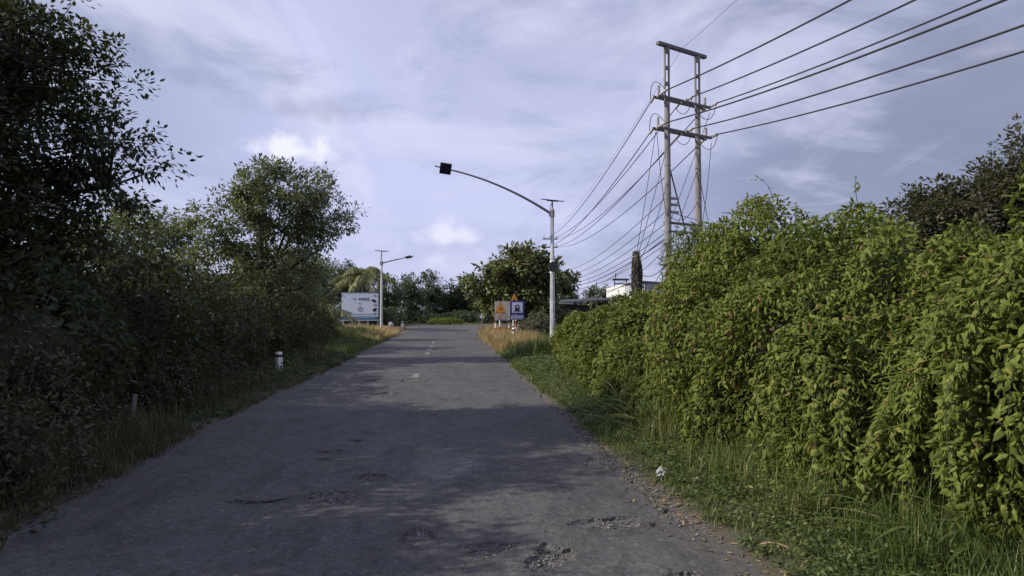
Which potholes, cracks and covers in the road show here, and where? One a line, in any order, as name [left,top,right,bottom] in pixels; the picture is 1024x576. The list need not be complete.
pothole [447,535,542,567]
pothole [213,495,312,509]
pothole [389,523,456,550]
pothole [503,532,601,576]
pothole [289,487,380,510]
pothole [343,471,396,483]
pothole [532,512,685,536]
